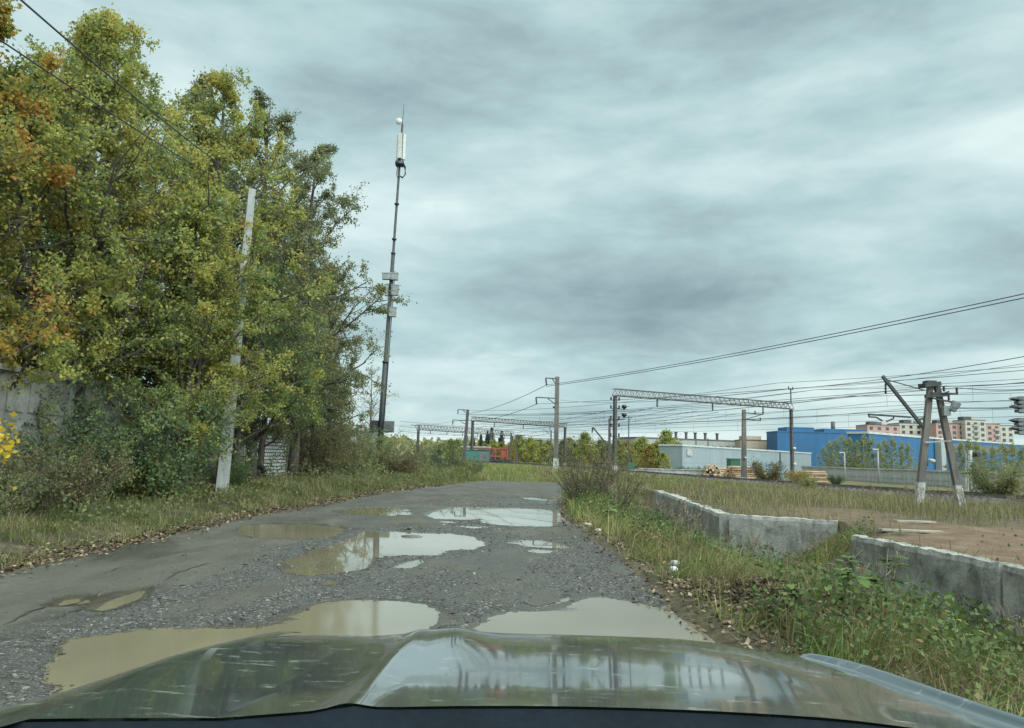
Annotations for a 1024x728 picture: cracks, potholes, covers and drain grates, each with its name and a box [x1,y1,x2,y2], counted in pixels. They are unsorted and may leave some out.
crack [7,563,207,623]
pothole [85,588,152,611]
pothole [504,539,576,549]
pothole [235,523,345,539]
pothole [424,506,566,527]
pothole [461,595,716,643]
pothole [50,596,90,606]
pothole [41,598,456,695]
pothole [278,530,490,576]
